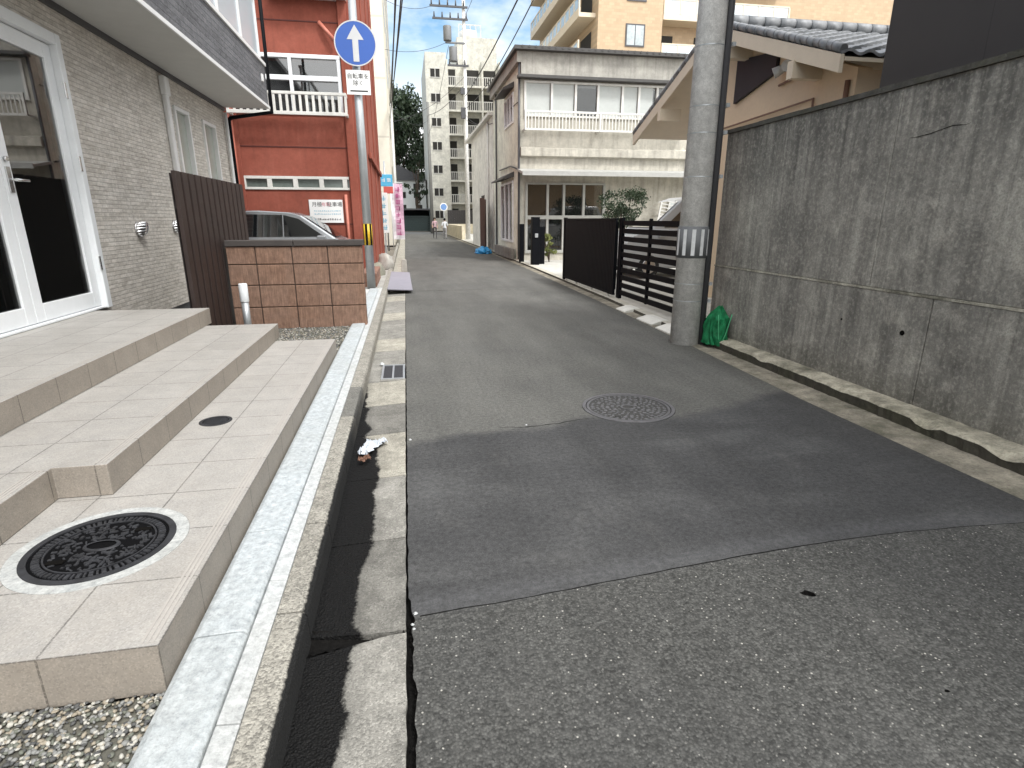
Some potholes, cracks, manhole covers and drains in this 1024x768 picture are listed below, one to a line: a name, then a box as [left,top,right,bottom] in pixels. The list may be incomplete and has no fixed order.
drain grate [381,364,405,380]
manhole cover [582,393,675,423]
crack [403,432,1024,768]
manhole cover [0,507,190,595]
